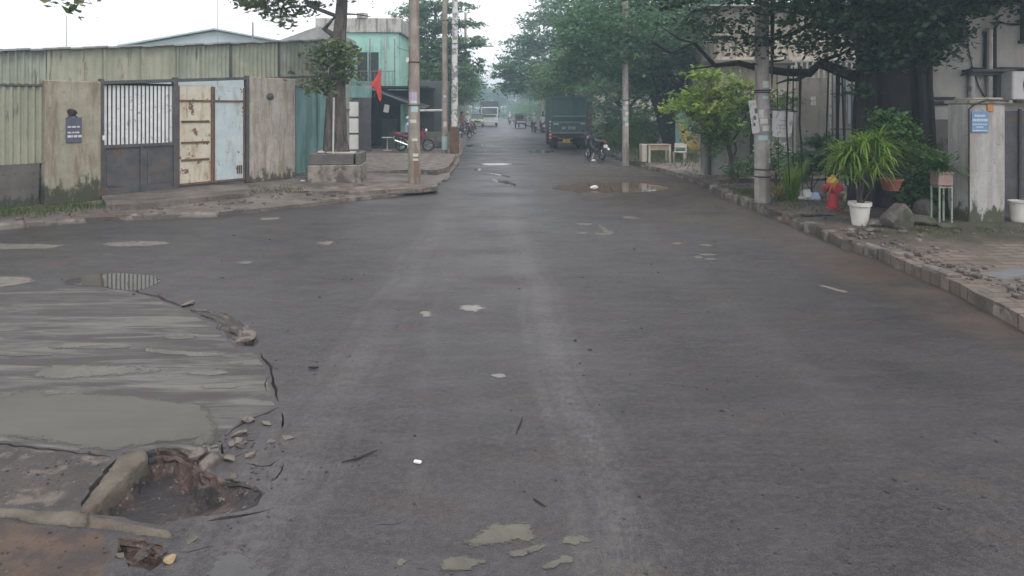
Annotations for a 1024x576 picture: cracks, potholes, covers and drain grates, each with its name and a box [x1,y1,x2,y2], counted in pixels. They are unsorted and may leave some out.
crack [205,508,273,522]
crack [136,290,183,307]
crack [220,353,284,483]
pothole [104,447,265,571]
